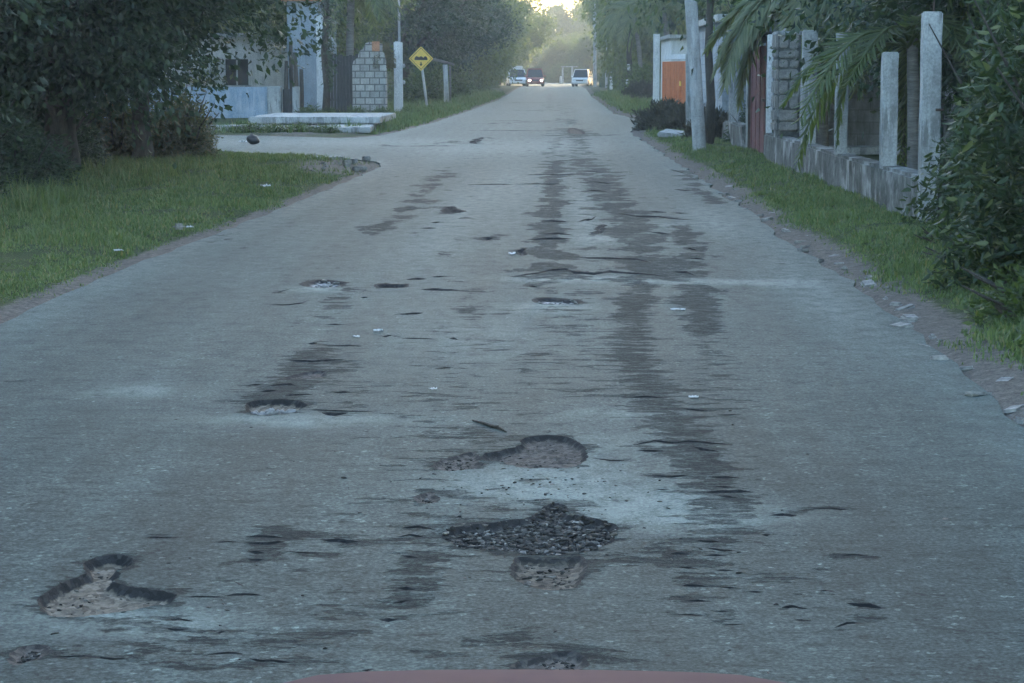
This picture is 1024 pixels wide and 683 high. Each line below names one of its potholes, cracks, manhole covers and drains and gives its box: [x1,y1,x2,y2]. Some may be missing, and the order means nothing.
pothole [509,651,591,670]
crack [512,248,700,287]
pothole [509,556,589,590]
pothole [6,644,53,665]
pothole [300,279,350,288]
pothole [441,501,619,555]
pothole [245,399,307,415]
pothole [479,435,588,469]
pothole [37,554,177,617]
pothole [432,452,487,471]
crack [772,507,846,517]
